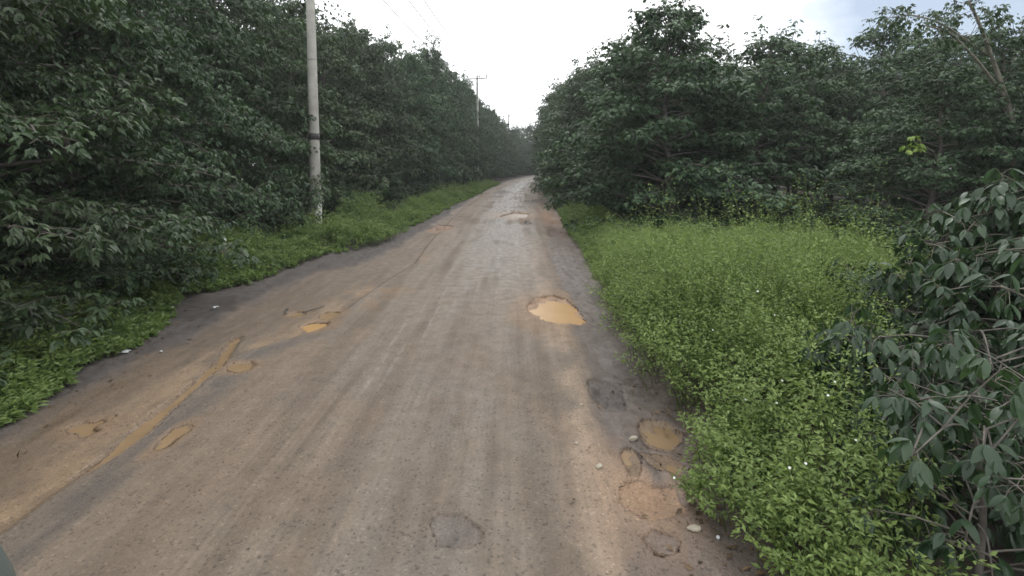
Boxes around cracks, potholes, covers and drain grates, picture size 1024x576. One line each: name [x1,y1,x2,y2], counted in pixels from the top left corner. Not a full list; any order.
pothole [618,446,642,480]
pothole [424,223,458,234]
pothole [584,374,627,413]
pothole [227,360,257,373]
pothole [635,417,684,453]
pothole [319,311,342,320]
pothole [298,321,332,333]
pothole [430,508,485,549]
